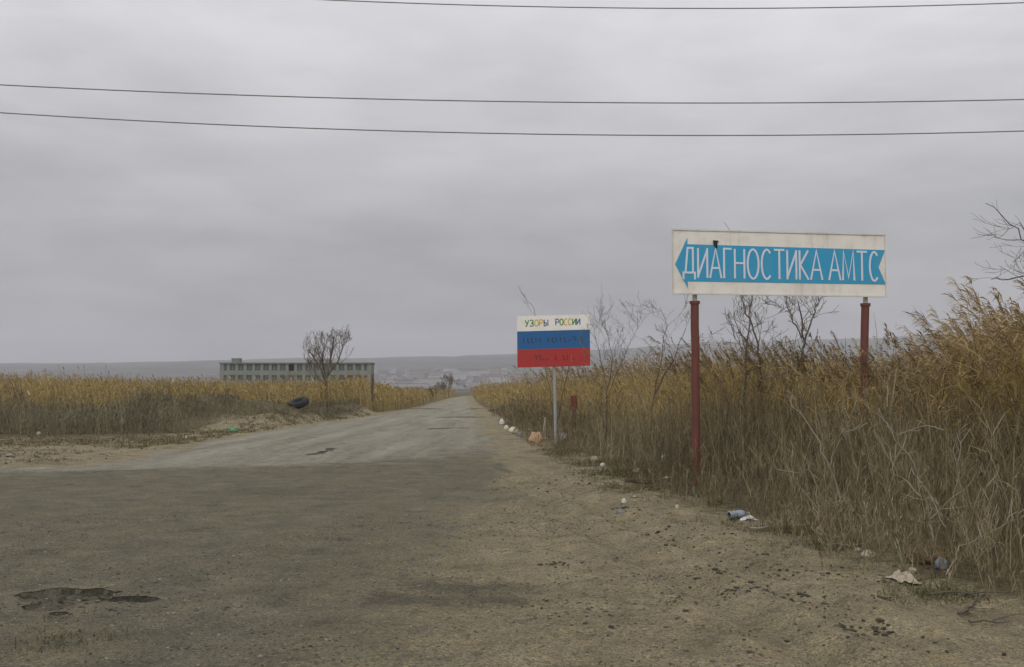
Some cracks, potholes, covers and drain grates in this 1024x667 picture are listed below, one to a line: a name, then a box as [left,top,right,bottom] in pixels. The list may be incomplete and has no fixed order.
pothole [14,588,160,616]
